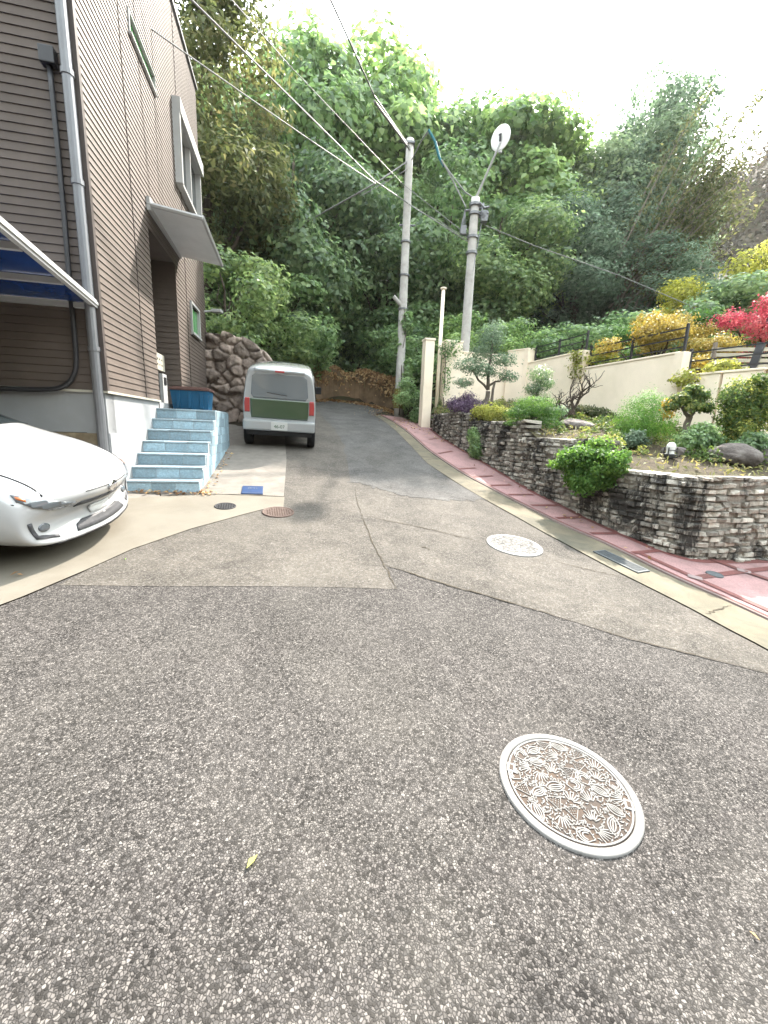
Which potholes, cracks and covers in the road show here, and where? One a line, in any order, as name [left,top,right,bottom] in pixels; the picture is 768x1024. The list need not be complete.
manhole cover [262,507,294,518]
drain grate [593,550,650,573]
manhole cover [486,534,543,557]
manhole cover [499,734,645,859]
crack [355,487,767,673]
